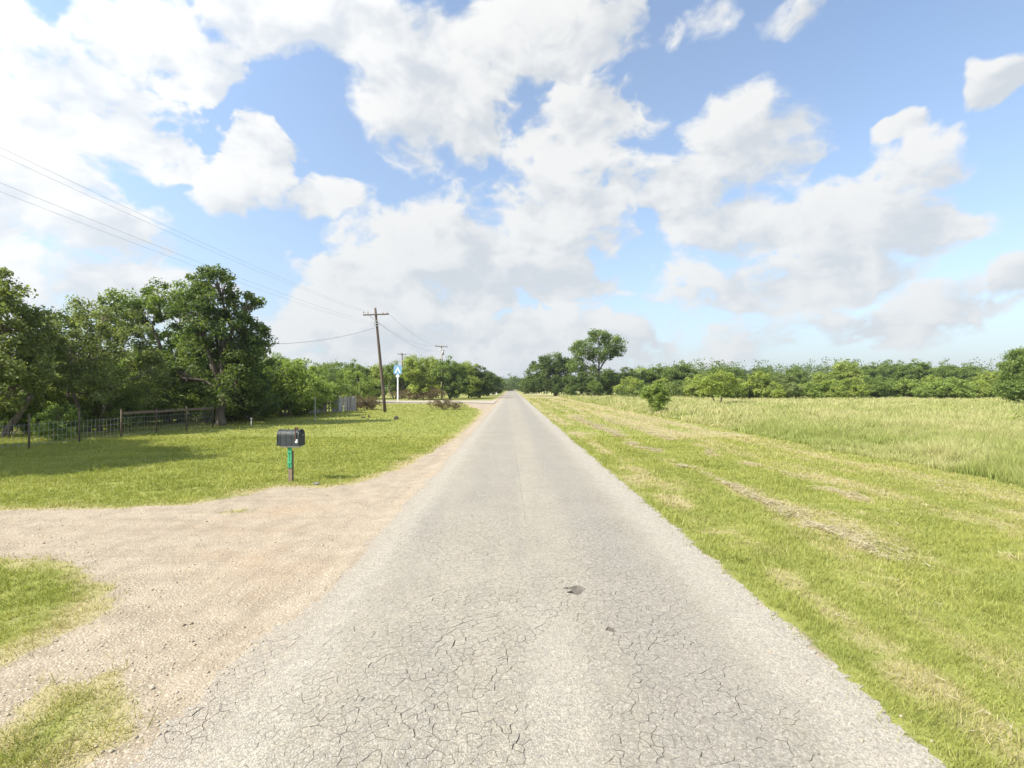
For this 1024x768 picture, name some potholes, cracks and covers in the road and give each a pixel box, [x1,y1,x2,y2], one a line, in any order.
crack [554,611,835,768]
crack [343,437,715,618]
crack [220,606,557,768]
pothole [564,585,586,595]
crack [144,631,308,761]
